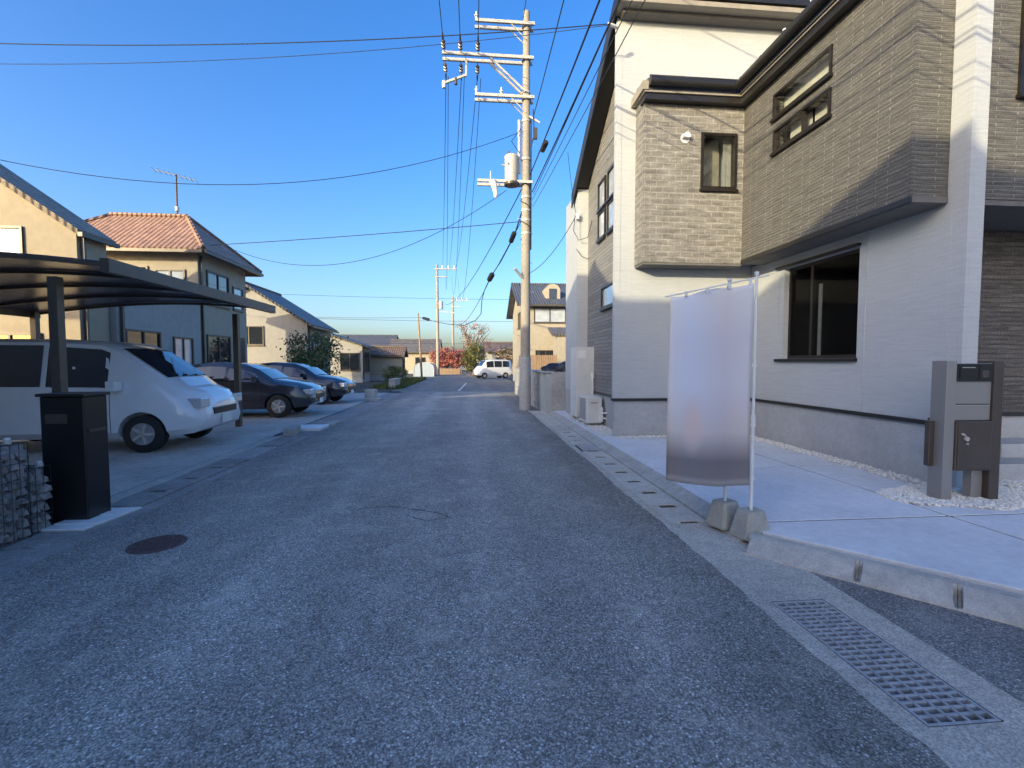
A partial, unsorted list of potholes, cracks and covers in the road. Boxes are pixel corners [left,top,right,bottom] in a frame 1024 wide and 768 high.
crack [352,506,452,521]
drain grate [772,600,1001,727]
manhole cover [125,534,188,555]
